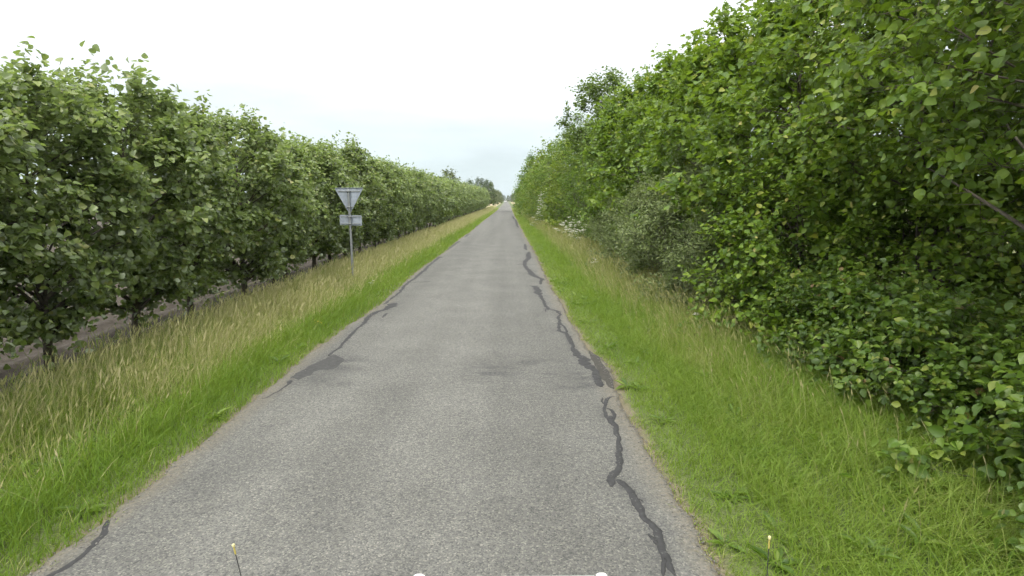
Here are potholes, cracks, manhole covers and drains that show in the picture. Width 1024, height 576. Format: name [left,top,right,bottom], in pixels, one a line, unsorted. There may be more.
crack [47,520,110,576]
